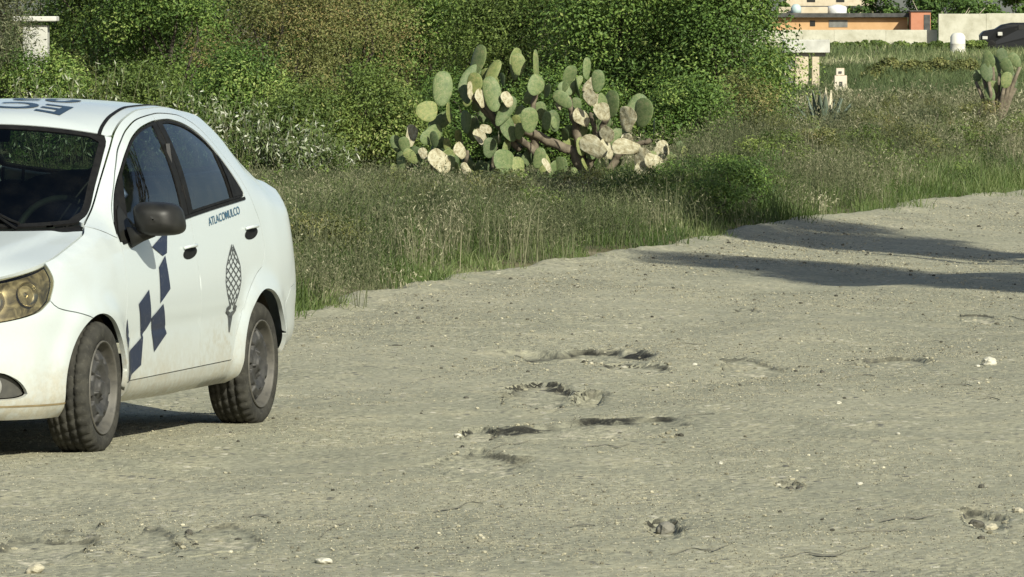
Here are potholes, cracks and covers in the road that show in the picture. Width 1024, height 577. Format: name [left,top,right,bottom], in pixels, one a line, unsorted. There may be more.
pothole [645,518,684,540]
pothole [572,389,607,408]
pothole [421,449,535,482]
pothole [584,364,670,375]
pothole [718,357,788,378]
pothole [451,427,508,446]
pothole [500,348,661,369]
pothole [773,480,806,491]
pothole [493,381,580,414]
pothole [842,356,937,370]
pothole [958,506,1009,535]
pothole [488,417,695,441]
